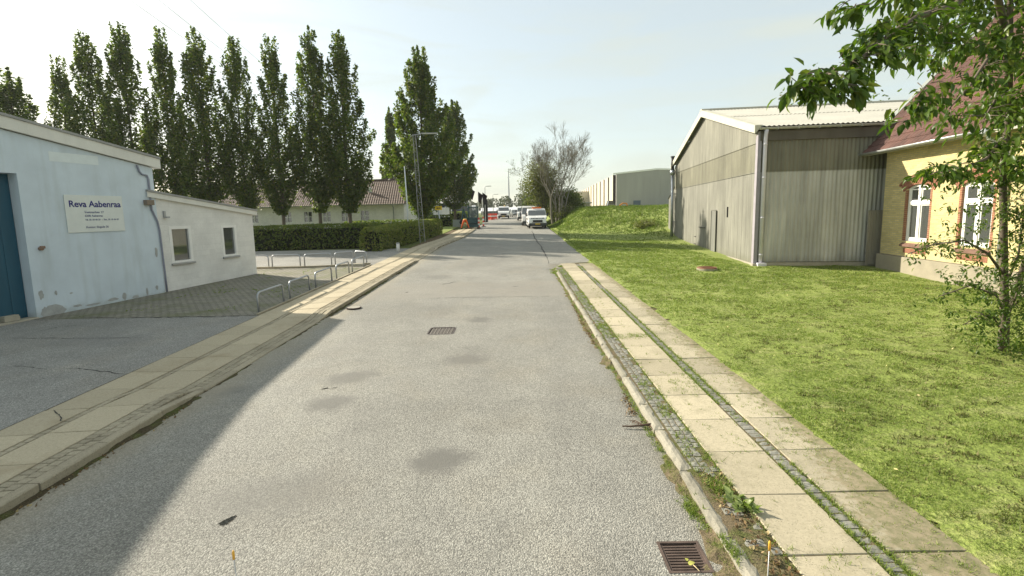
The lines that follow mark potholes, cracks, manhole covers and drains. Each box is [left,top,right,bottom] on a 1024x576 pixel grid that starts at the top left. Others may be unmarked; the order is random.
drain grate [656,541,715,574]
